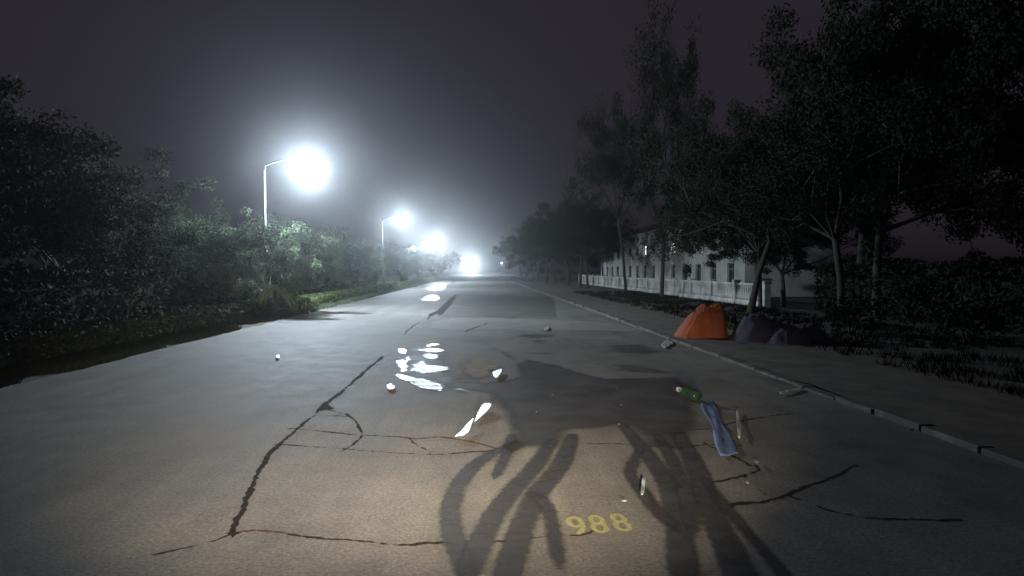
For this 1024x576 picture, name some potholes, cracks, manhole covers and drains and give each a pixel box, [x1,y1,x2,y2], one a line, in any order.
crack [649,413,962,521]
crack [153,356,495,555]
